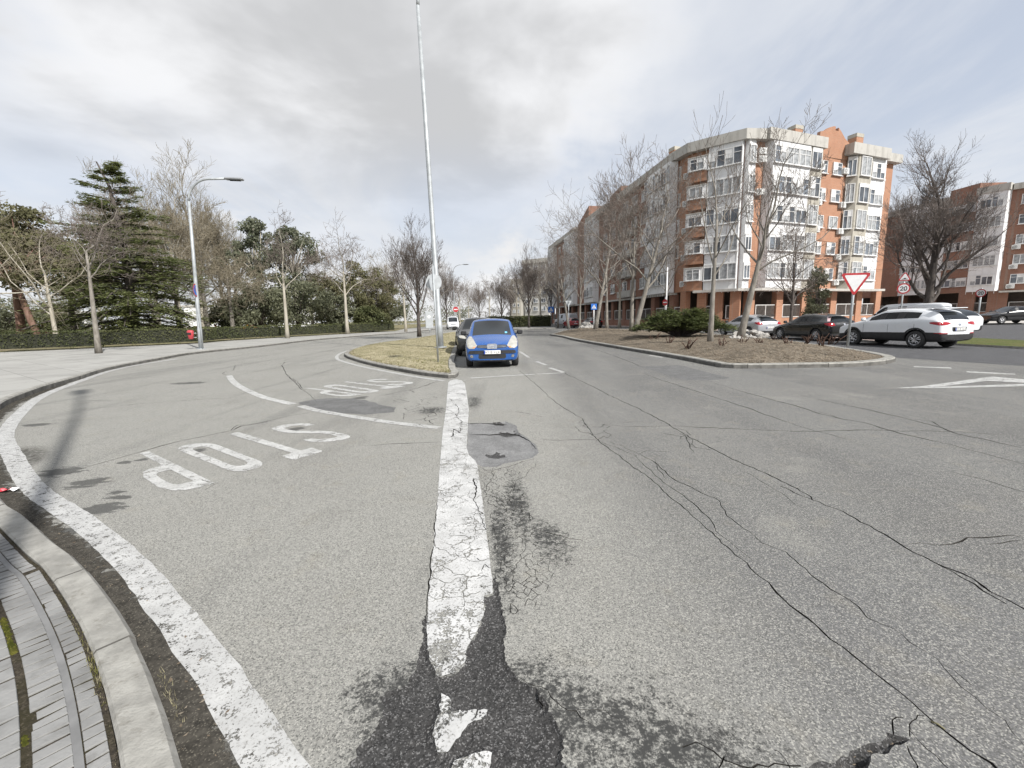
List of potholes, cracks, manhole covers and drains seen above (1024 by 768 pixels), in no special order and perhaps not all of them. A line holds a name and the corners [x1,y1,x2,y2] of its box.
crack [451,369,1024,768]
crack [426,501,438,615]
